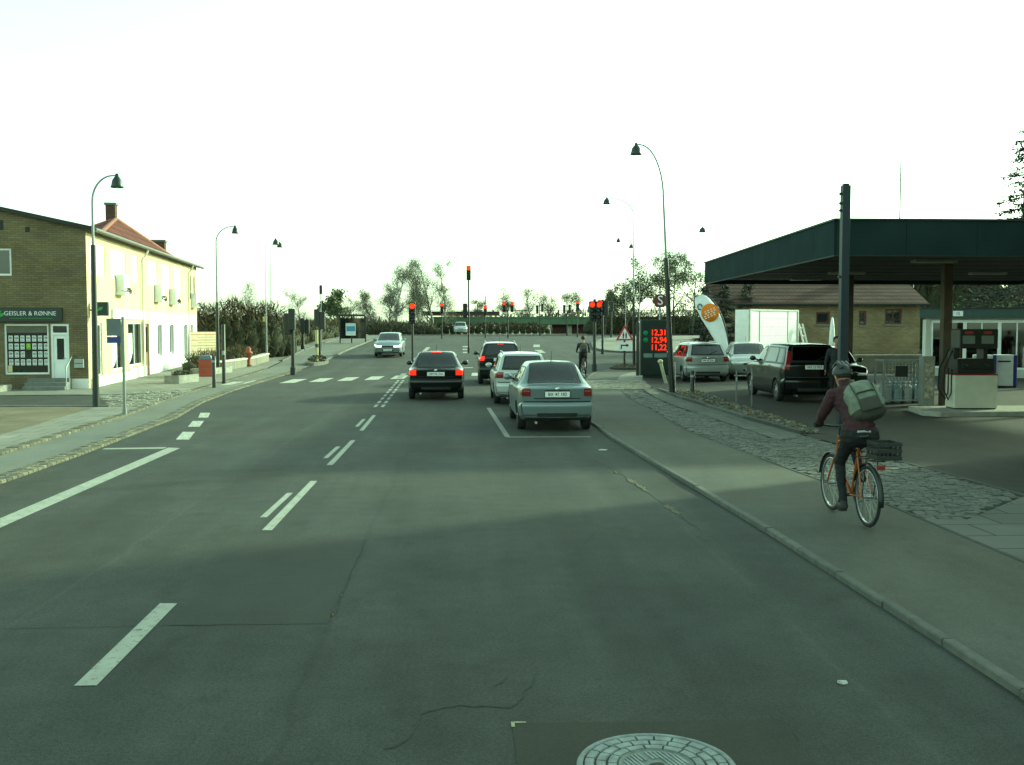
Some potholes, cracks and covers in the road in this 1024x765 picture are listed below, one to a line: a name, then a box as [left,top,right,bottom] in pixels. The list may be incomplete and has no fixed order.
crack [383,674,536,750]
crack [330,540,365,620]
manhole cover [577,733,736,765]
